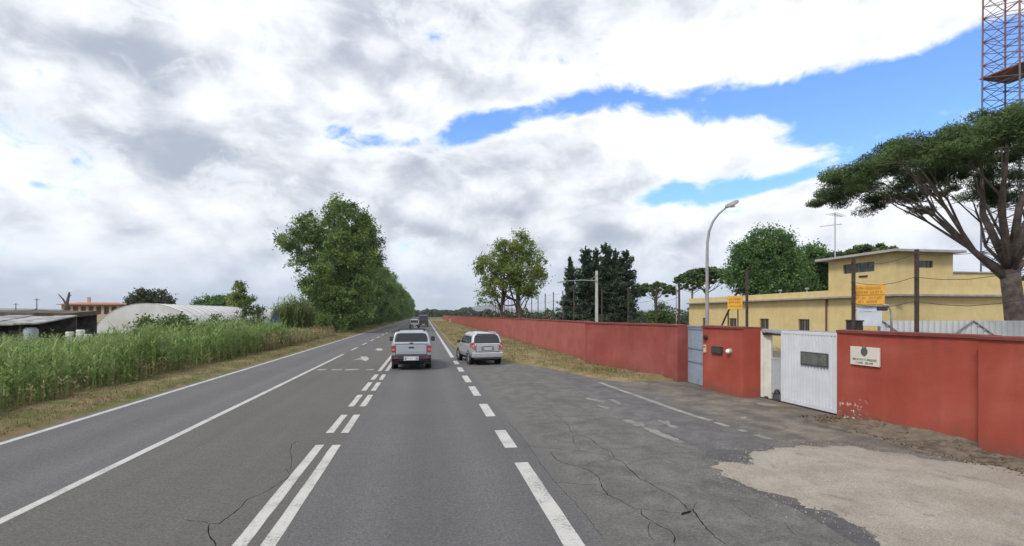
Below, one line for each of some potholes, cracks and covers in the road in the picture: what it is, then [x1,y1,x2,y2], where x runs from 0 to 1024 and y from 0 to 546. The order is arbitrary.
crack [513,411,797,545]
crack [188,440,317,546]
